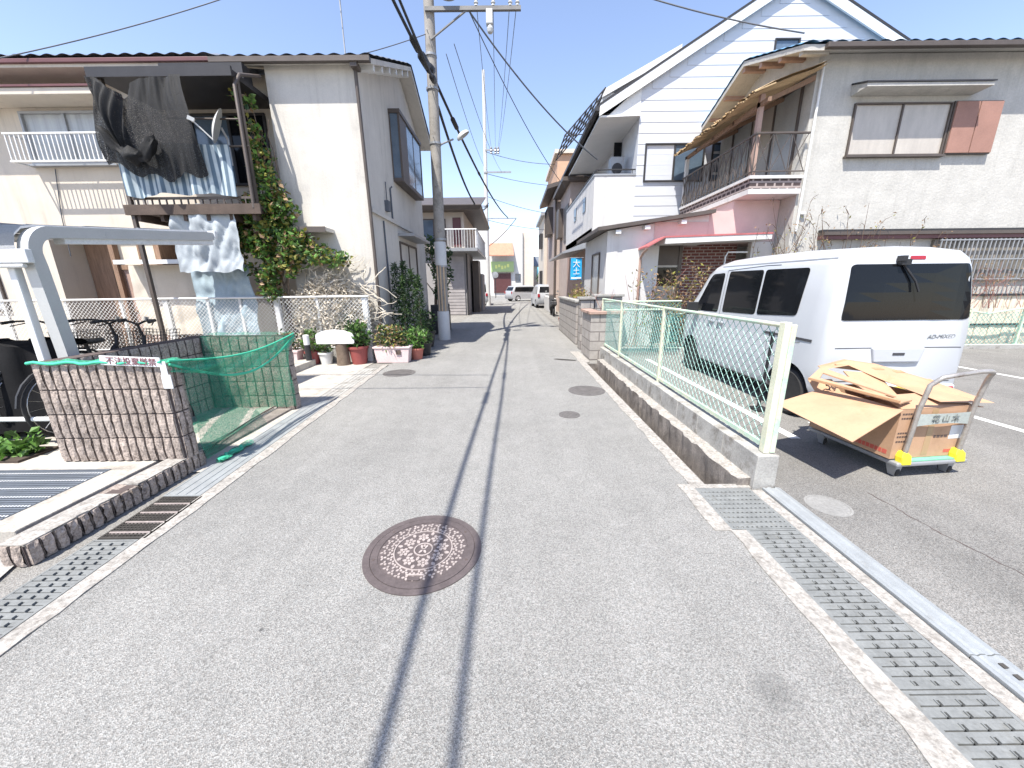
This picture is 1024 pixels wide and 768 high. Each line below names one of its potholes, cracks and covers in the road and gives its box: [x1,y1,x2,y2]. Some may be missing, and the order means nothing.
manhole cover [568,386,605,396]
drain grate [695,488,796,530]
manhole cover [804,495,854,517]
drain grate [902,690,1024,768]
drain grate [0,469,111,520]
drain grate [746,529,984,691]
drain grate [0,539,139,639]
crack [867,492,1024,575]
manhole cover [362,515,481,596]
drain grate [97,496,201,540]
manhole cover [383,369,416,377]
